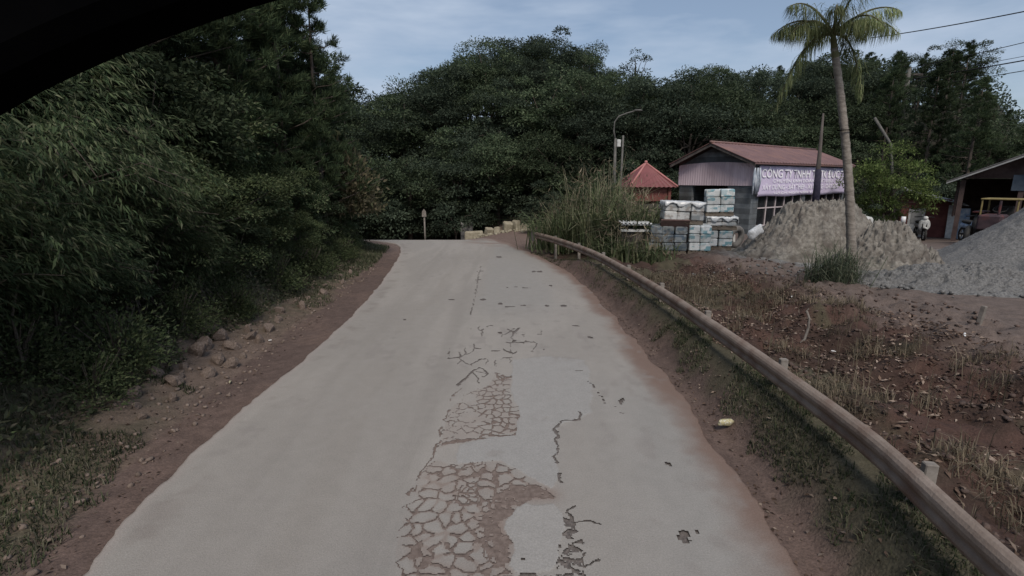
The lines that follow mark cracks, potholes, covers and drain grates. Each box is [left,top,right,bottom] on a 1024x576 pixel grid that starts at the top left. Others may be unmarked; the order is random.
pothole [676,530,692,543]
crack [395,267,616,576]
